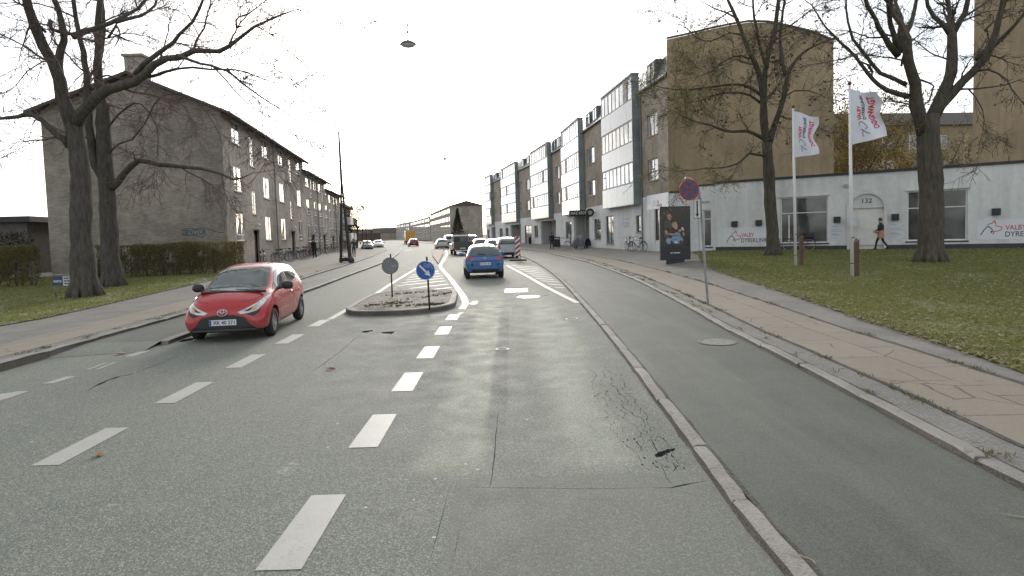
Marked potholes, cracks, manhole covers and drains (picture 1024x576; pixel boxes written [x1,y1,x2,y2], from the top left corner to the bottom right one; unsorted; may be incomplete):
crack [590,370,686,485]
manhole cover [697,338,738,346]
